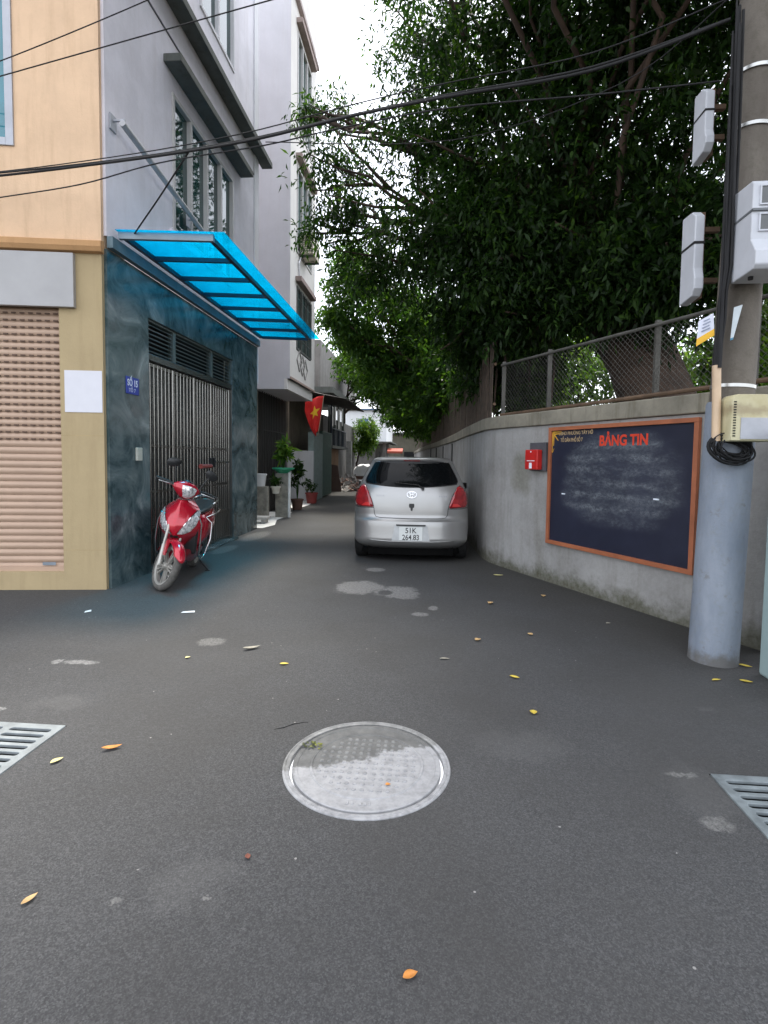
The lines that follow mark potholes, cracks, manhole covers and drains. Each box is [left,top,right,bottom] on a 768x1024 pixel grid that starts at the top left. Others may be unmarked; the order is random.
drain grate [709,774,768,840]
drain grate [0,722,66,775]
manhole cover [282,722,451,821]
